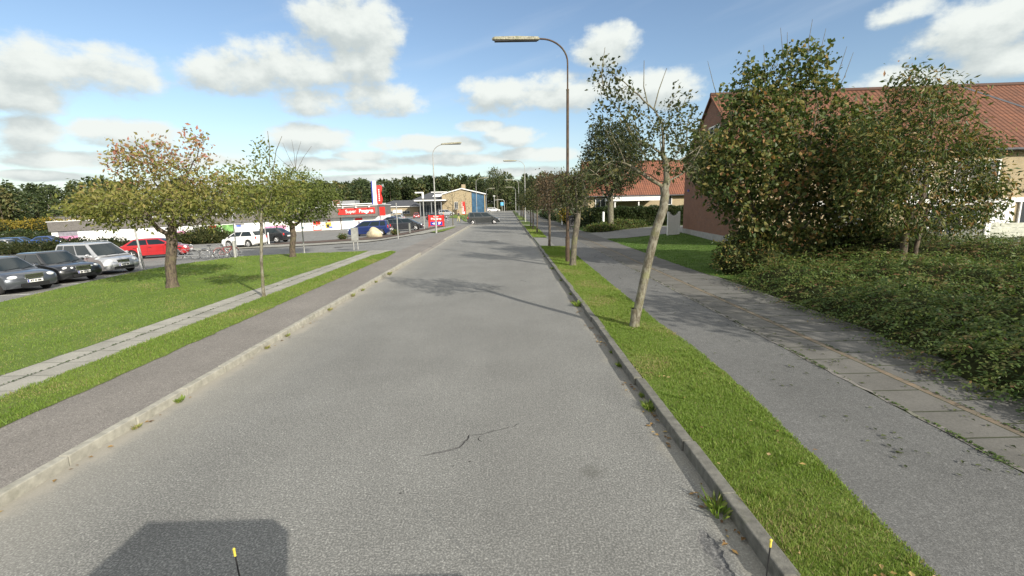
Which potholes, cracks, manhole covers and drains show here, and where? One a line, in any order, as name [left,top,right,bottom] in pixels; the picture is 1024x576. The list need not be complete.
crack [421,423,519,456]
